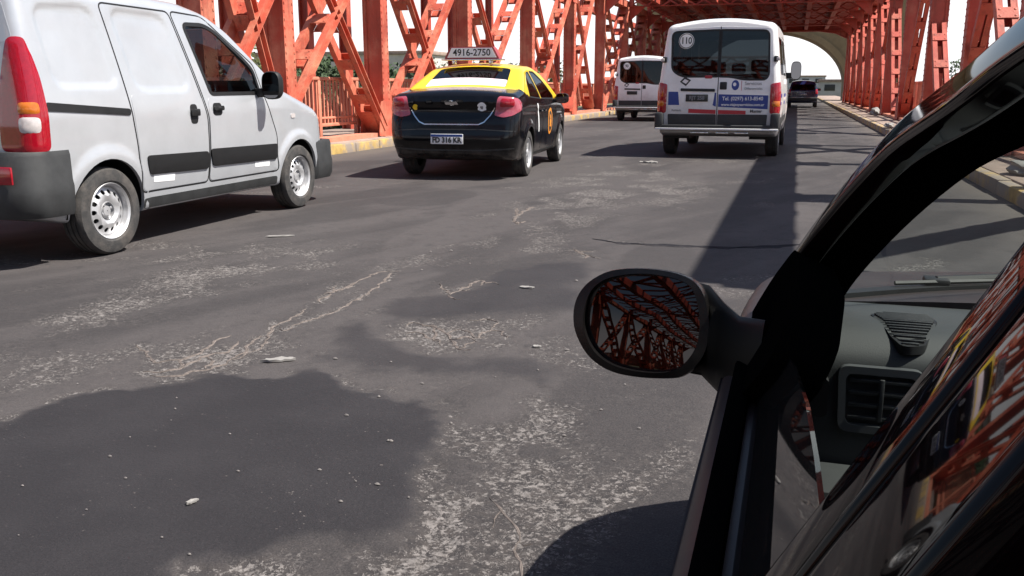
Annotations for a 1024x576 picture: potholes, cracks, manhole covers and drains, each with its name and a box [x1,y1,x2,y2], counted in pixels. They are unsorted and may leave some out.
crack [406,318,508,350]
crack [489,497,531,576]
crack [439,280,499,300]
crack [512,207,534,225]
crack [136,271,391,377]
